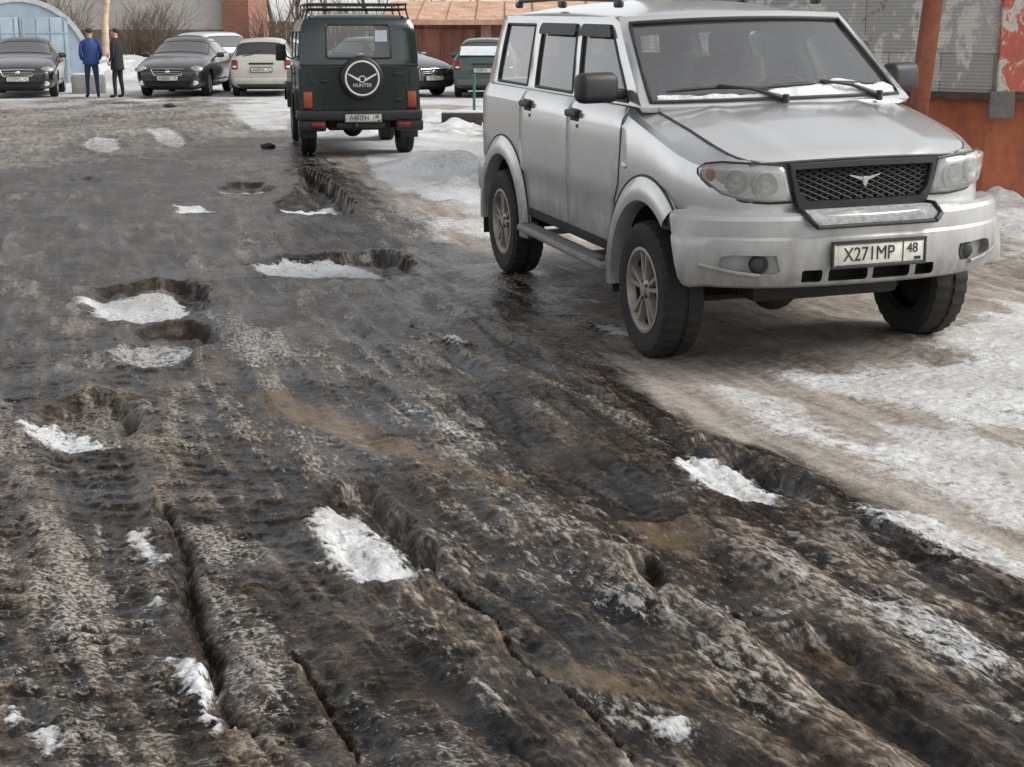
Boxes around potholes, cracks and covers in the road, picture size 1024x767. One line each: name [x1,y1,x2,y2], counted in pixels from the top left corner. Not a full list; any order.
pothole [258,250,414,280]
pothole [75,278,214,324]
pothole [278,171,354,216]
pothole [315,478,444,582]
pothole [215,182,274,194]
pothole [676,434,810,507]
pothole [23,387,141,454]
pothole [112,322,222,368]
pothole [627,551,670,594]
